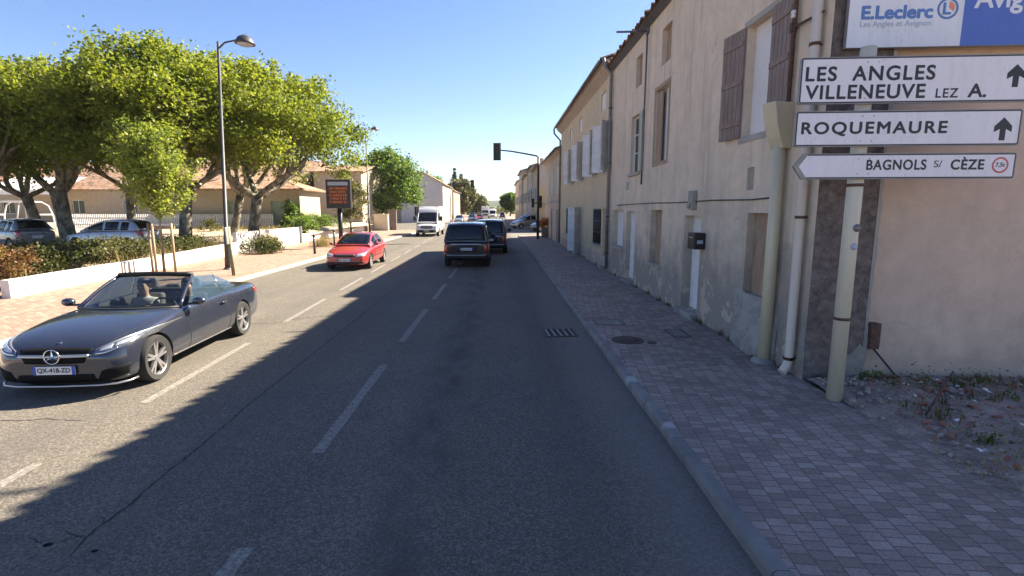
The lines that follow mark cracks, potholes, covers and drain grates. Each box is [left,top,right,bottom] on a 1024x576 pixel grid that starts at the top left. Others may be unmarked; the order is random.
manhole cover [611,336,644,344]
manhole cover [663,329,692,337]
drain grate [541,328,579,337]
